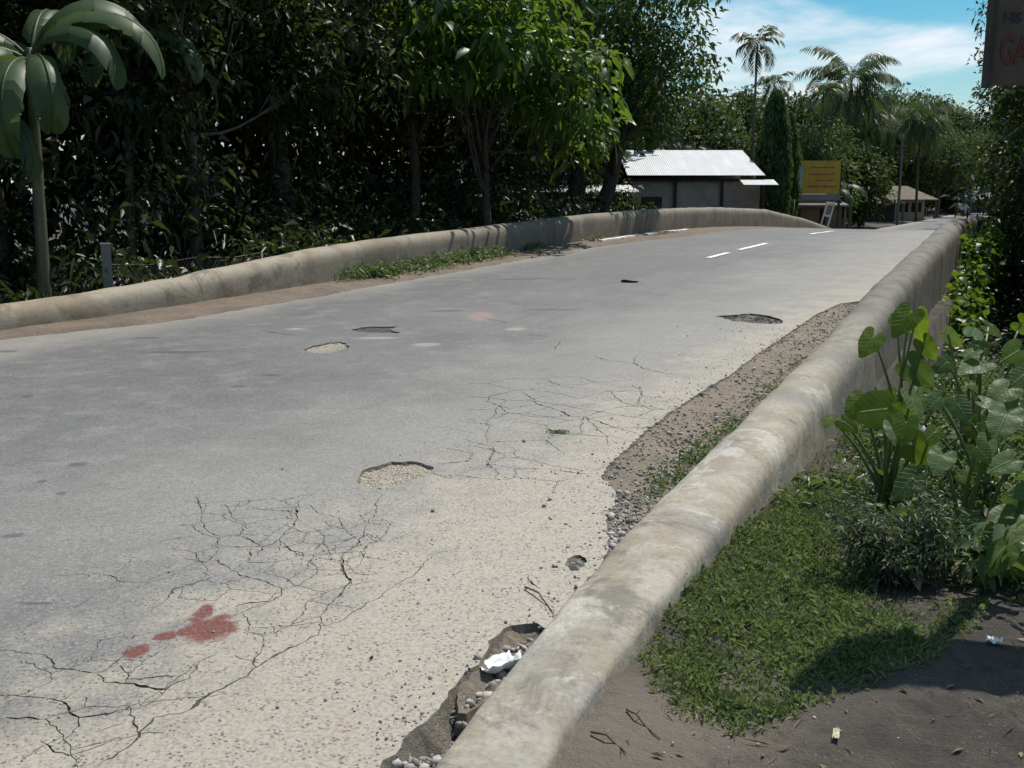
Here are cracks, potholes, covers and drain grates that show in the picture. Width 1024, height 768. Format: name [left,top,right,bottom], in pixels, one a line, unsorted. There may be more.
pothole [360,461,434,491]
crack [14,495,391,767]
crack [431,376,671,488]
pothole [567,556,587,571]
pothole [305,342,348,353]
pothole [722,313,783,324]
pothole [452,630,541,738]
